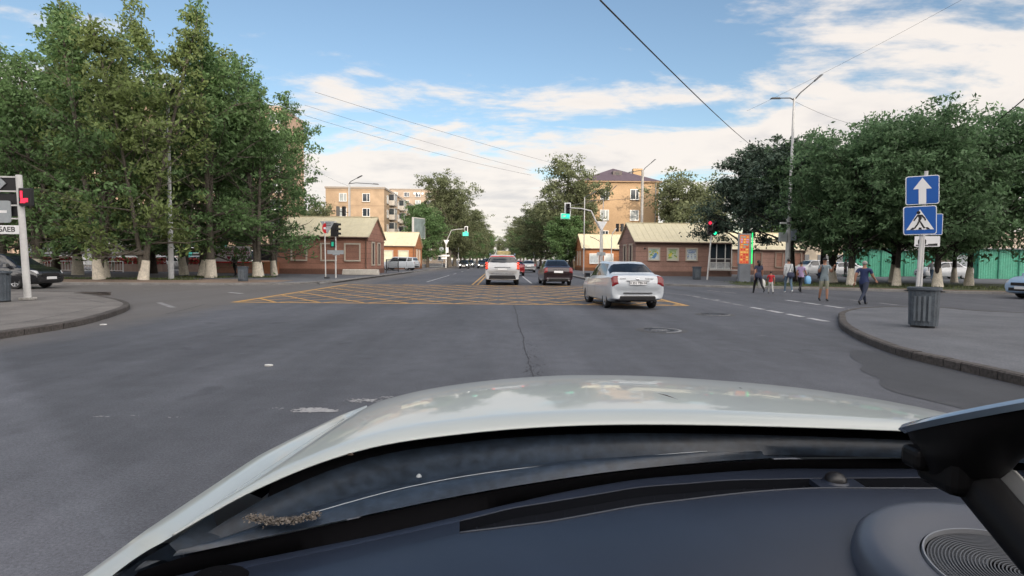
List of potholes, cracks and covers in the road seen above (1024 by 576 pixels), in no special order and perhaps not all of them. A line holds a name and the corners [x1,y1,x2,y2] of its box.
crack [514,306,545,377]
